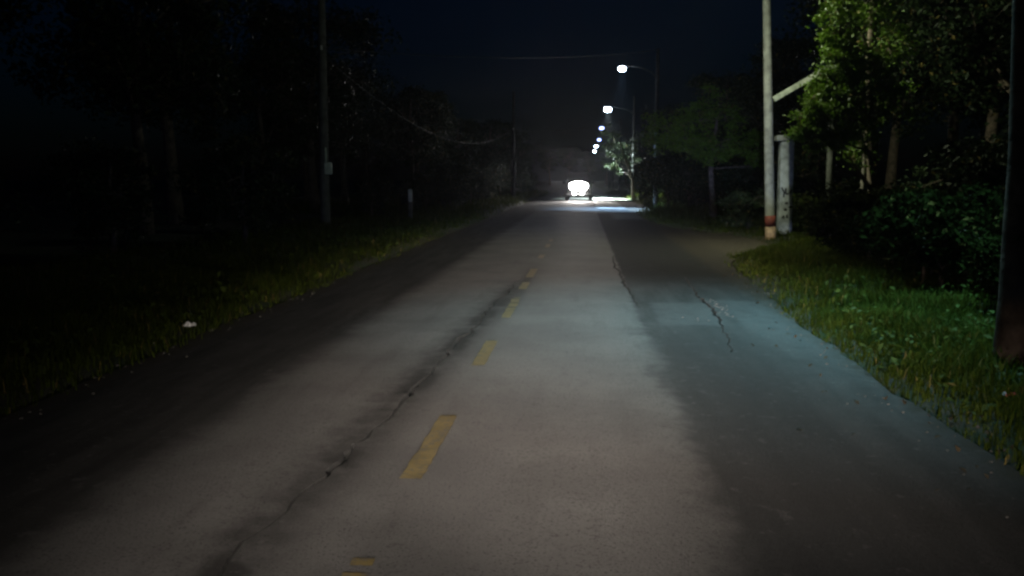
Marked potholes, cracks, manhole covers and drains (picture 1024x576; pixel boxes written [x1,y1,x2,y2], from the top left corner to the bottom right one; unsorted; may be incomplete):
crack [216,276,523,576]
crack [612,256,639,307]
crack [682,277,734,352]
